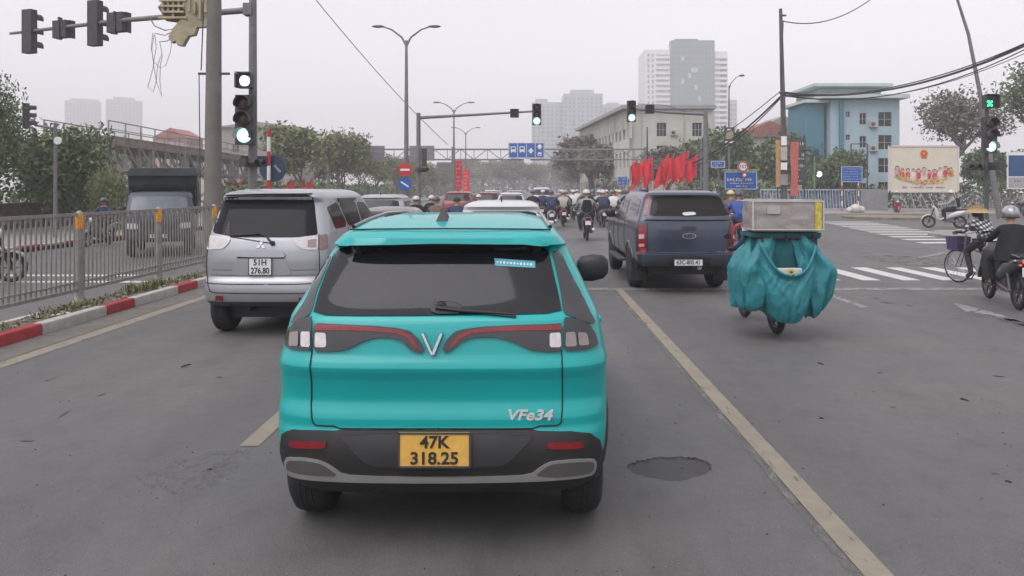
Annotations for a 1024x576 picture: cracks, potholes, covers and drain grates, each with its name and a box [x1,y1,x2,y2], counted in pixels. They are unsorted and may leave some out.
pothole [627,456,712,482]
